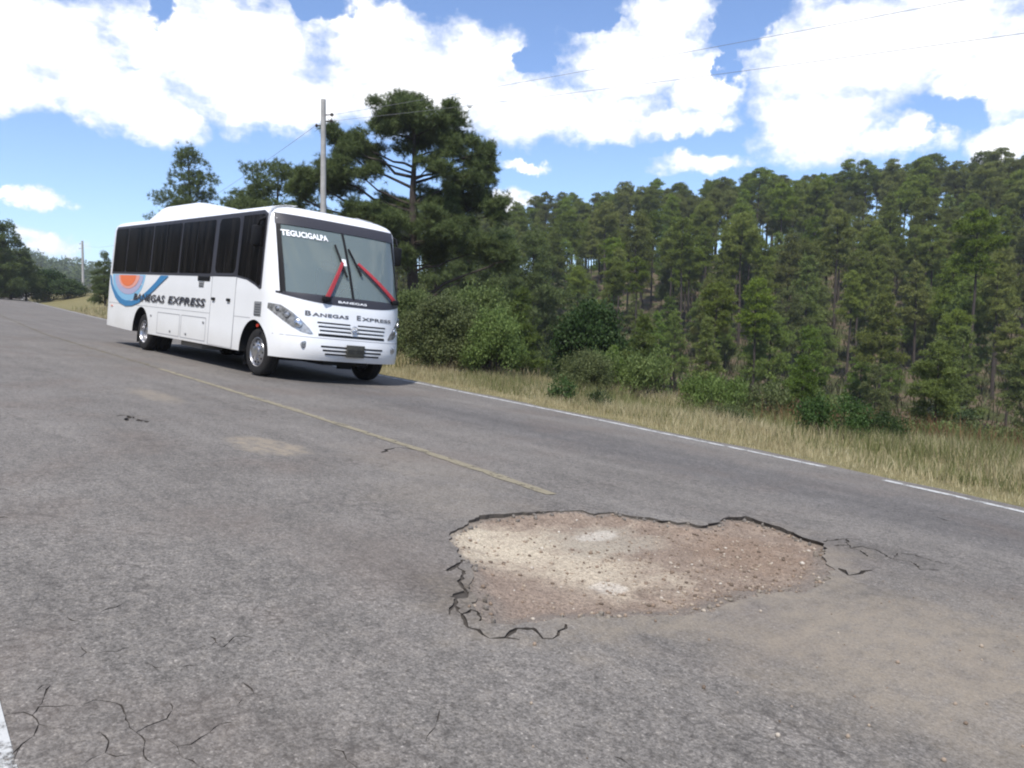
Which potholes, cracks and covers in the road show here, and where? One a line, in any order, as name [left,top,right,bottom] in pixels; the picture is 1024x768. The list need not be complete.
crack [80,646,196,668]
pothole [449,510,835,625]
crack [823,538,945,576]
crack [7,685,233,768]
